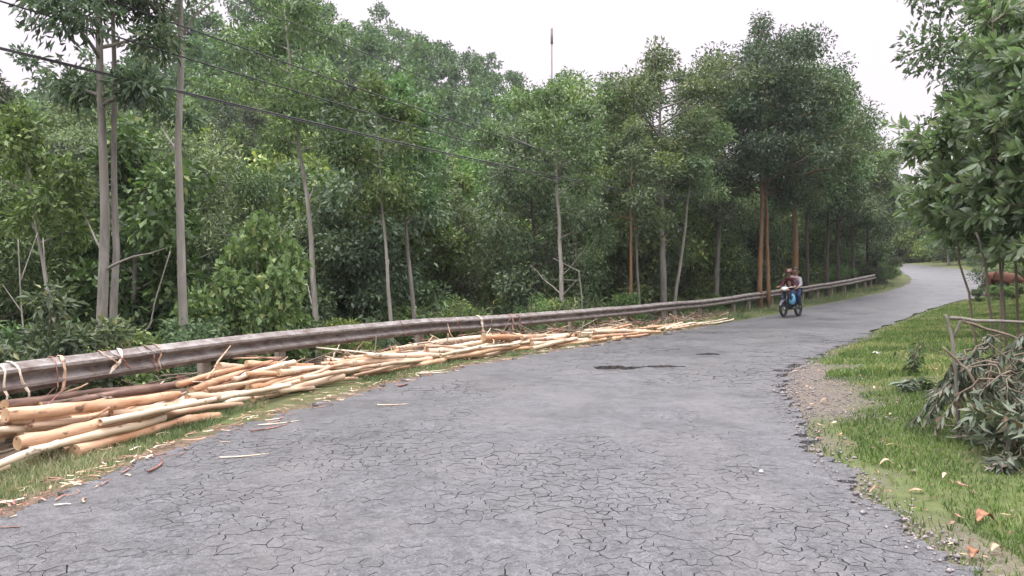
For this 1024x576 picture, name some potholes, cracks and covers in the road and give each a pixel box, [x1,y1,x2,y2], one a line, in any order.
crack [302,410,968,576]
crack [0,331,858,576]
